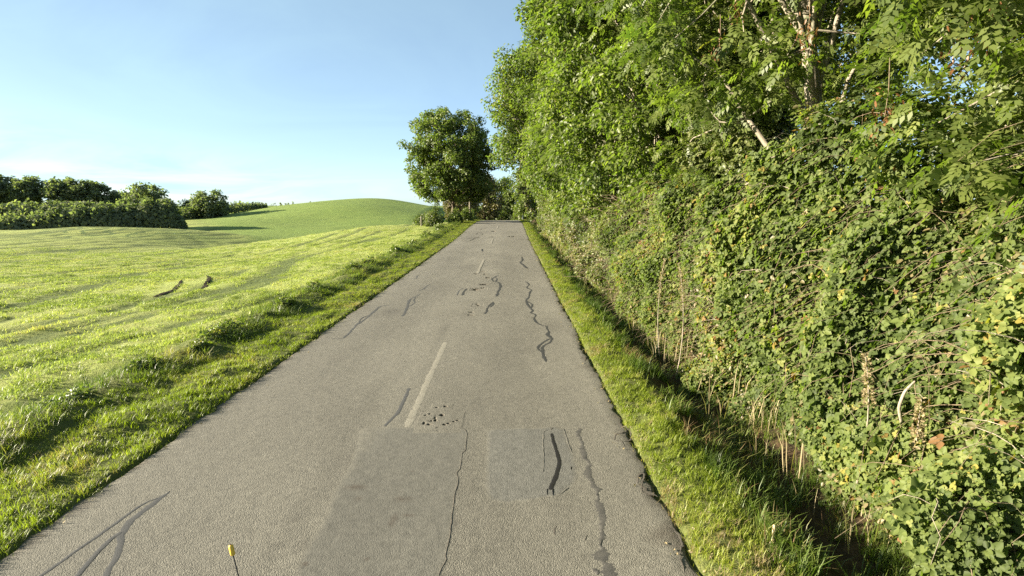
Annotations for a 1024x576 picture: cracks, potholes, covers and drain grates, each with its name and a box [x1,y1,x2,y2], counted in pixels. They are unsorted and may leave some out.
pothole [413,412,466,433]
crack [636,473,658,497]
crack [613,423,632,446]
crack [439,428,467,574]
